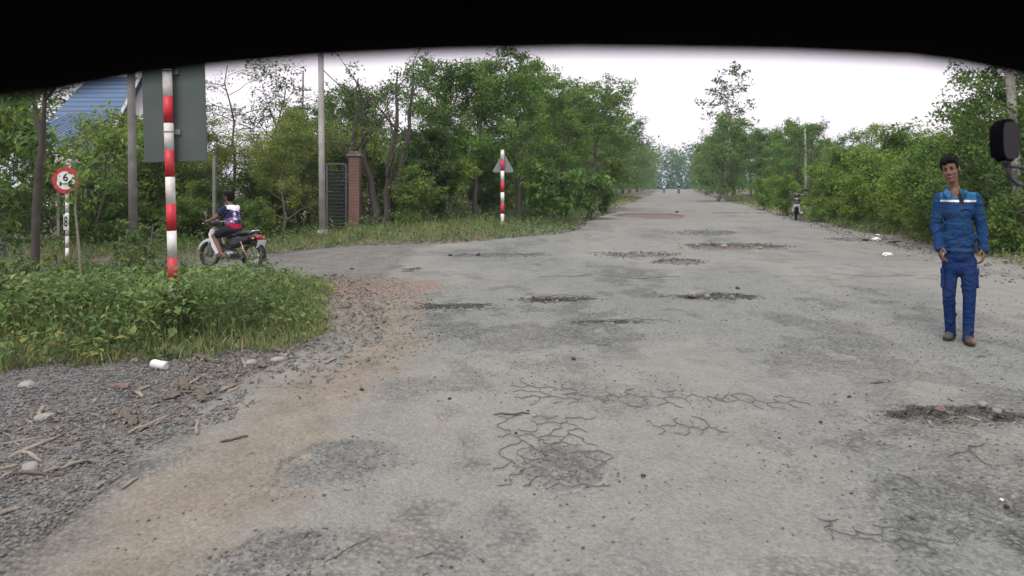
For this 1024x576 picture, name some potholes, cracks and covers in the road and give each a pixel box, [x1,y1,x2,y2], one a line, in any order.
crack [948,443,992,467]
pothole [514,296,601,304]
pothole [876,404,1024,429]
crack [818,515,975,557]
pothole [411,303,495,311]
crack [493,381,811,489]
pothole [670,293,760,302]
